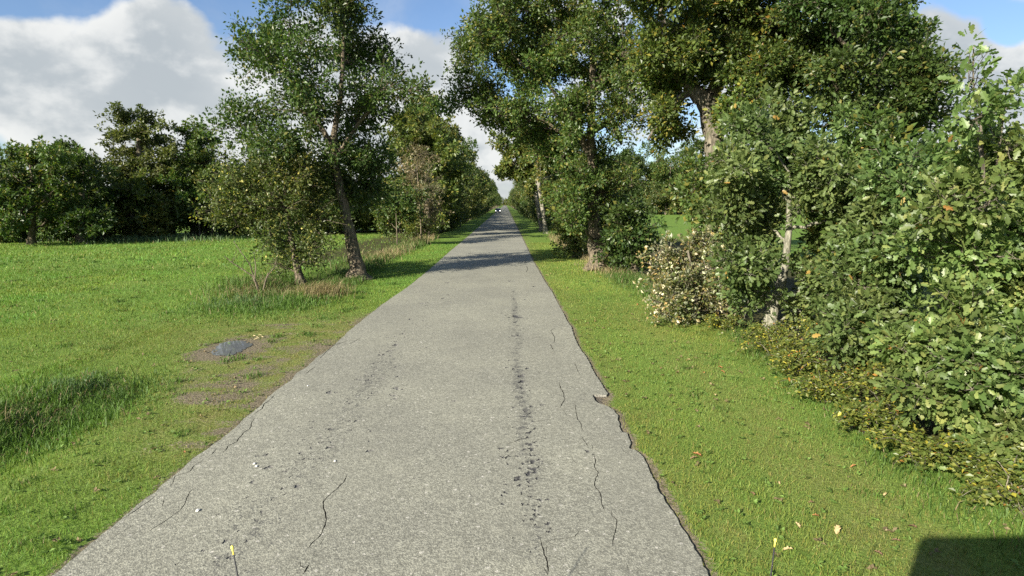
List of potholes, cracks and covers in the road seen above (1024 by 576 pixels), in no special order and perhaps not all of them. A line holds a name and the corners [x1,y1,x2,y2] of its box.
crack [300,475,347,574]
crack [113,396,274,538]
crack [548,364,621,543]
